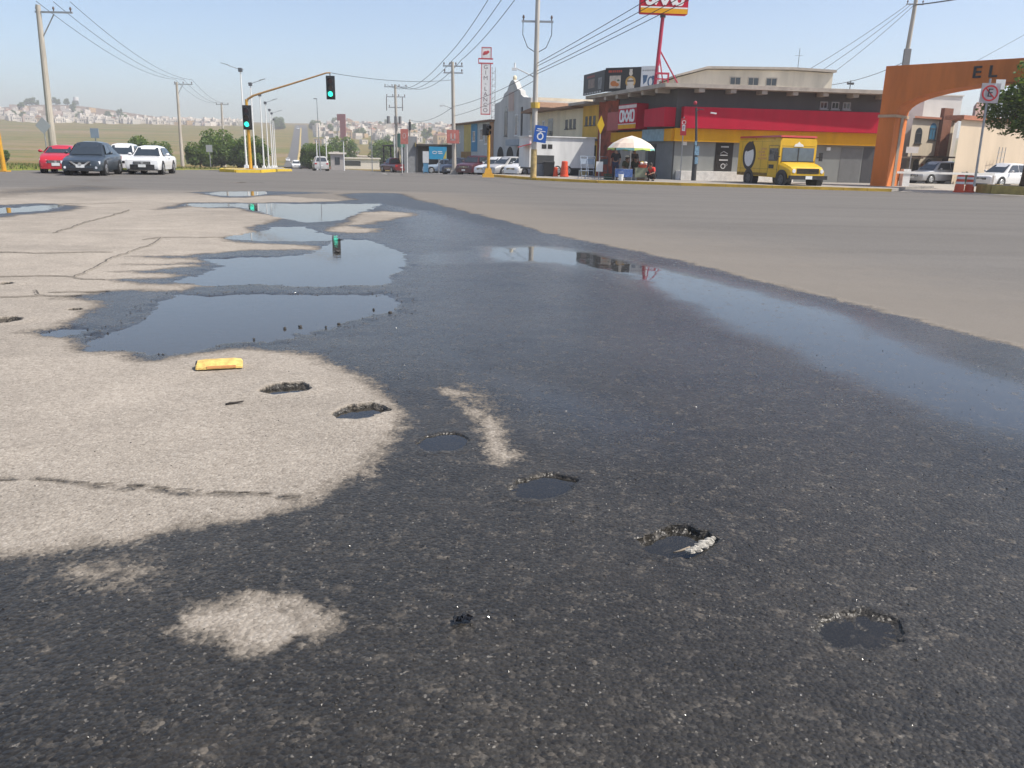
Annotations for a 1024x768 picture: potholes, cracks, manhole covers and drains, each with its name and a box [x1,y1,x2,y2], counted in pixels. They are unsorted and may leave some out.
pothole [492,468,593,506]
pothole [794,600,926,662]
crack [0,237,227,298]
pothole [316,398,406,424]
pothole [243,378,326,399]
pothole [400,428,484,457]
crack [53,202,133,233]
pothole [620,518,736,567]
crack [0,477,302,497]
